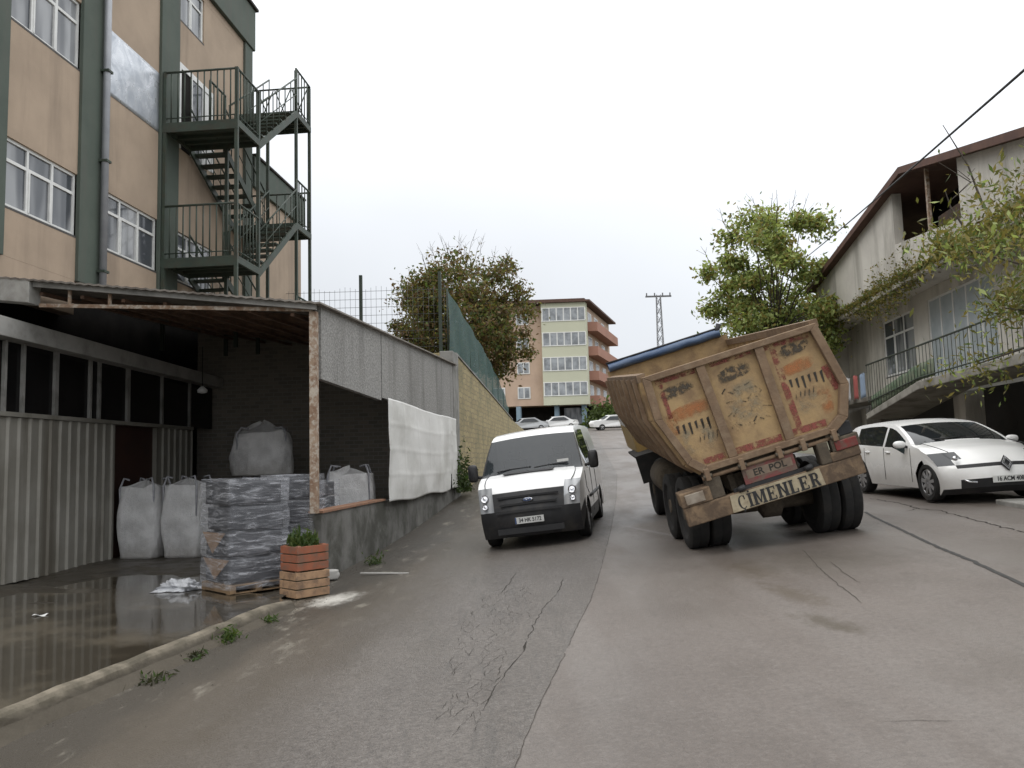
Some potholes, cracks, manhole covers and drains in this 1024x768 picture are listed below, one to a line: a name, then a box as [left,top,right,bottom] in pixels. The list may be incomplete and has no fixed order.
crack [802,549,859,601]
crack [435,573,563,737]
